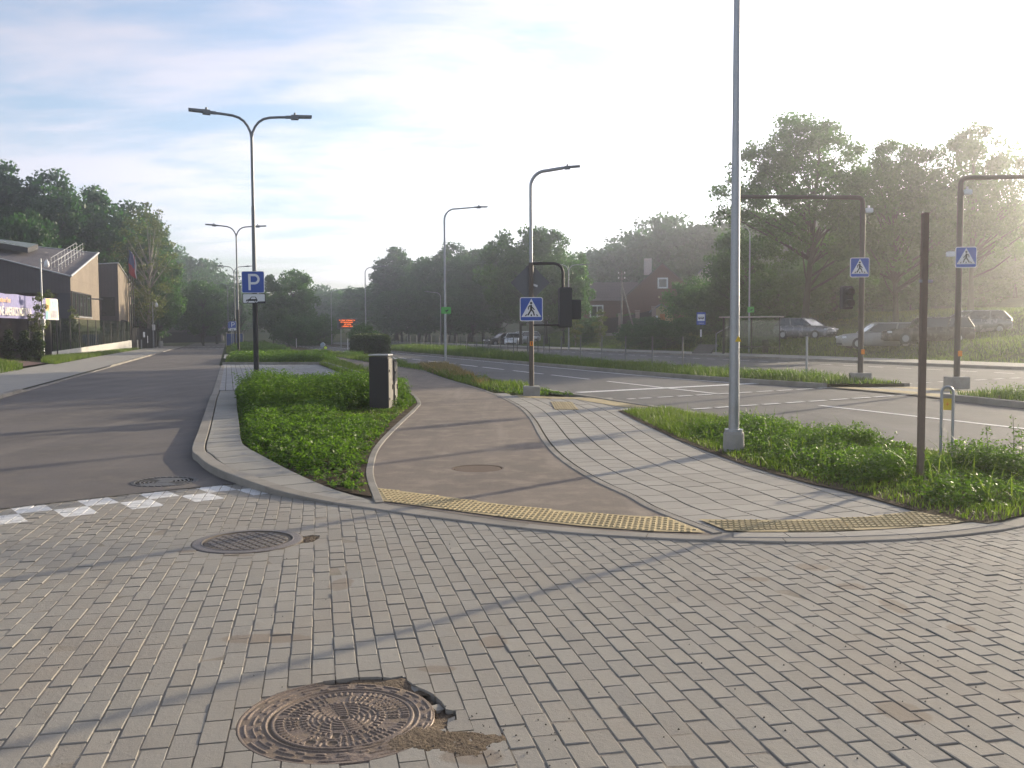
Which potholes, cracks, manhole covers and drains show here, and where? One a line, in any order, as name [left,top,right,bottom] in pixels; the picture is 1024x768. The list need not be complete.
manhole cover [236,684,435,766]
manhole cover [191,529,303,554]
